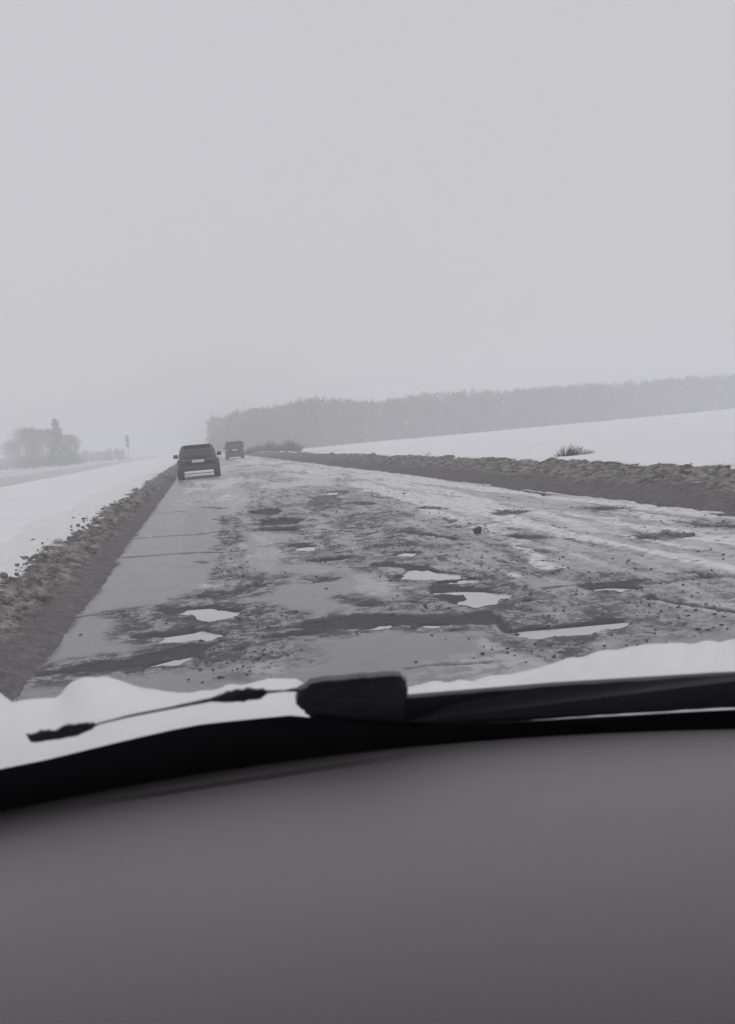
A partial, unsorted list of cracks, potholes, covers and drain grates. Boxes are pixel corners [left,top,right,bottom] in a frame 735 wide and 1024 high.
pothole [365,559,473,581]
pothole [145,603,245,623]
pothole [285,542,320,551]
pothole [424,583,515,609]
pothole [122,625,230,643]
pothole [508,616,639,640]
pothole [246,507,284,515]
pothole [28,641,222,678]
pothole [249,517,306,526]
